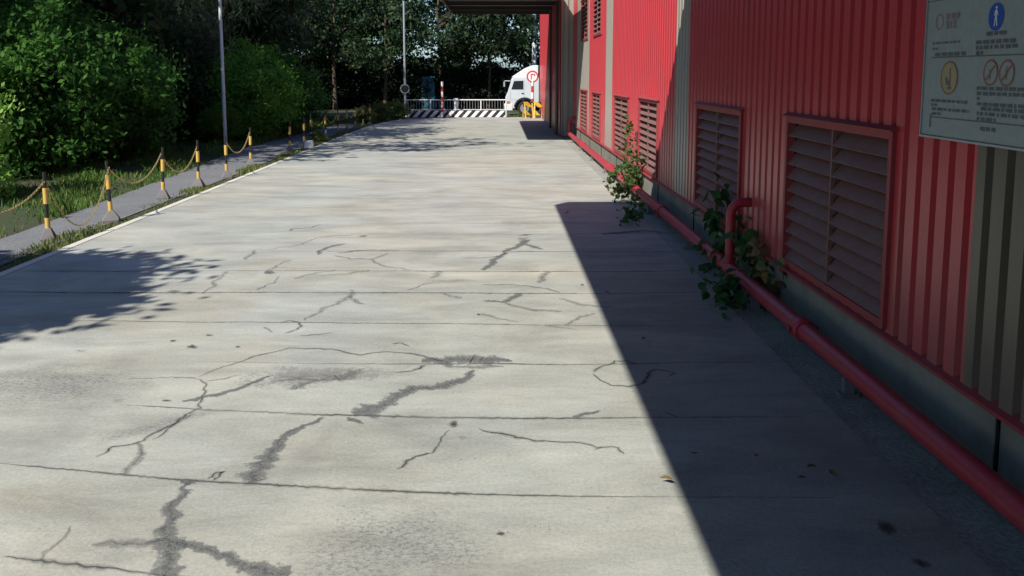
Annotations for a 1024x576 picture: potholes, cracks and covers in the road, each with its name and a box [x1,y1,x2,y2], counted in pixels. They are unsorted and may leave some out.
crack [98,471,291,576]
crack [98,320,624,471]
crack [243,417,323,483]
crack [482,234,547,311]
